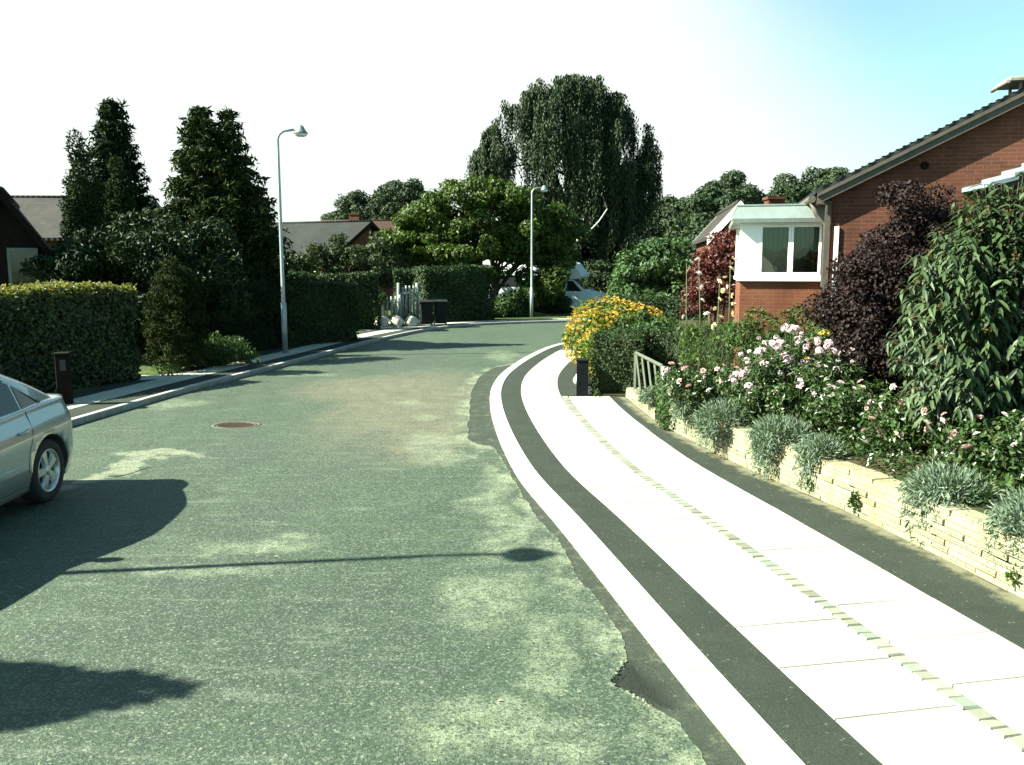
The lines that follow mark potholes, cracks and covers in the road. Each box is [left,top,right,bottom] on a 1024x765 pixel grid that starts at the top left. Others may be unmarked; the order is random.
manhole cover [212,421,262,429]
